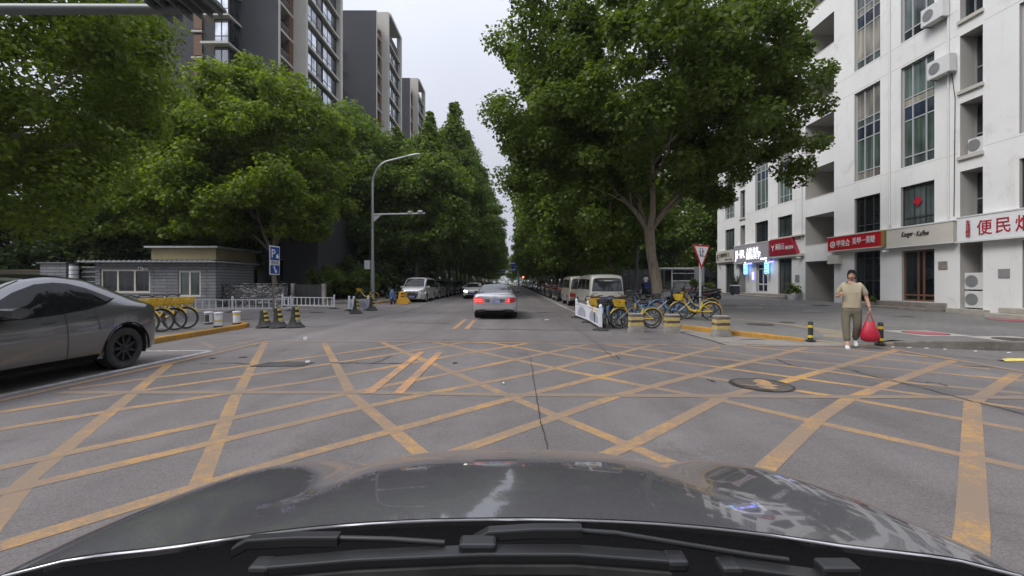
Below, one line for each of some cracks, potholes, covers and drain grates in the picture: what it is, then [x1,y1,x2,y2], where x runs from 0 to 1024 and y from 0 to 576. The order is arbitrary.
crack [526,353,548,449]
manhole cover [728,378,796,392]
